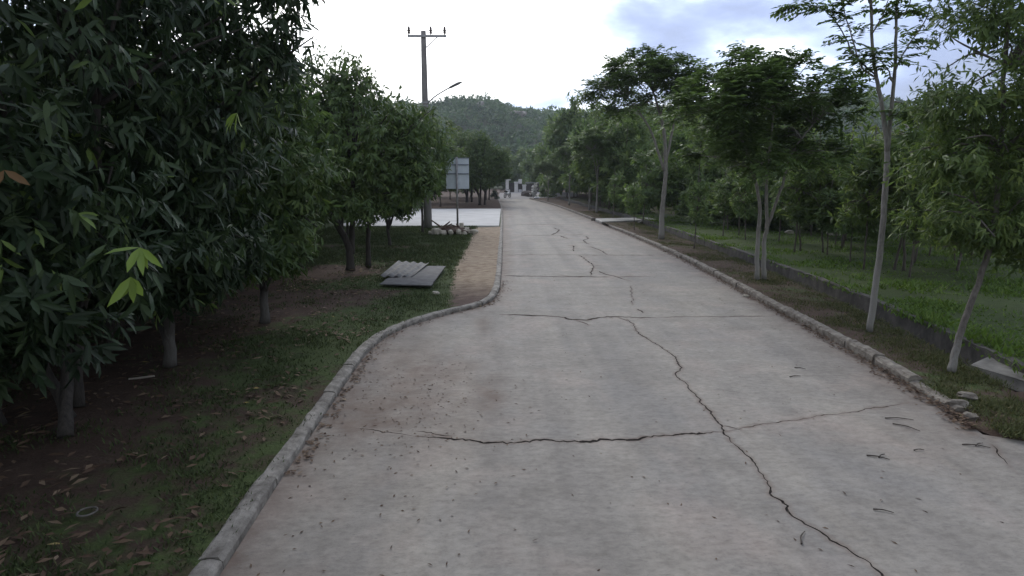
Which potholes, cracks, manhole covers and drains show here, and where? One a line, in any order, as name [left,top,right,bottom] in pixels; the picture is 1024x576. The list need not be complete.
crack [552,228,884,576]
